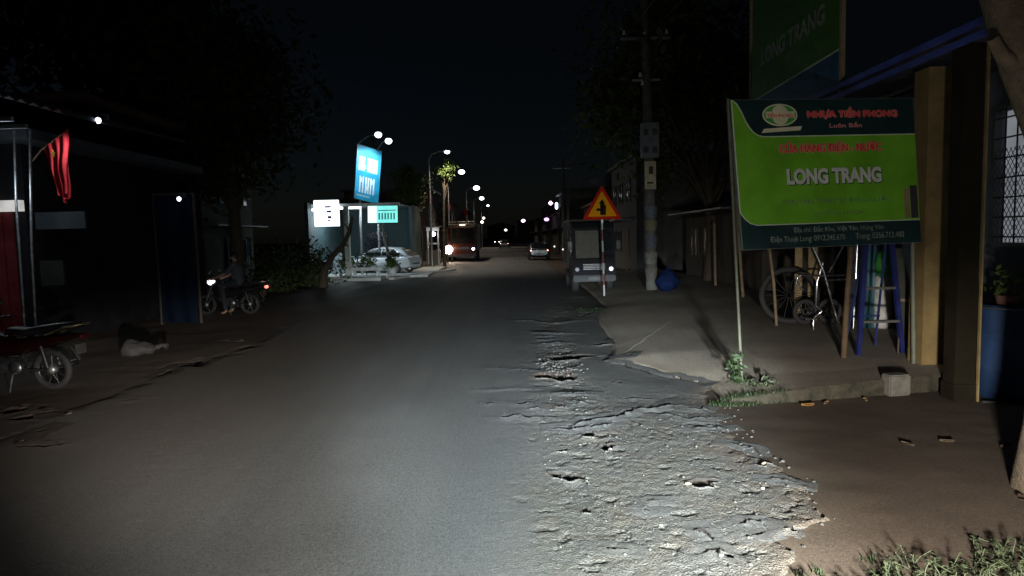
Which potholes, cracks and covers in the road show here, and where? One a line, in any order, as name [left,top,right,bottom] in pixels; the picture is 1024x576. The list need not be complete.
pothole [669,476,728,494]
pothole [595,441,621,460]
pothole [539,469,593,488]
pothole [576,430,599,443]
pothole [528,371,583,386]
pothole [538,353,608,364]
pothole [577,501,601,523]
crack [579,539,651,559]
crack [624,495,789,564]
crack [470,307,819,492]
